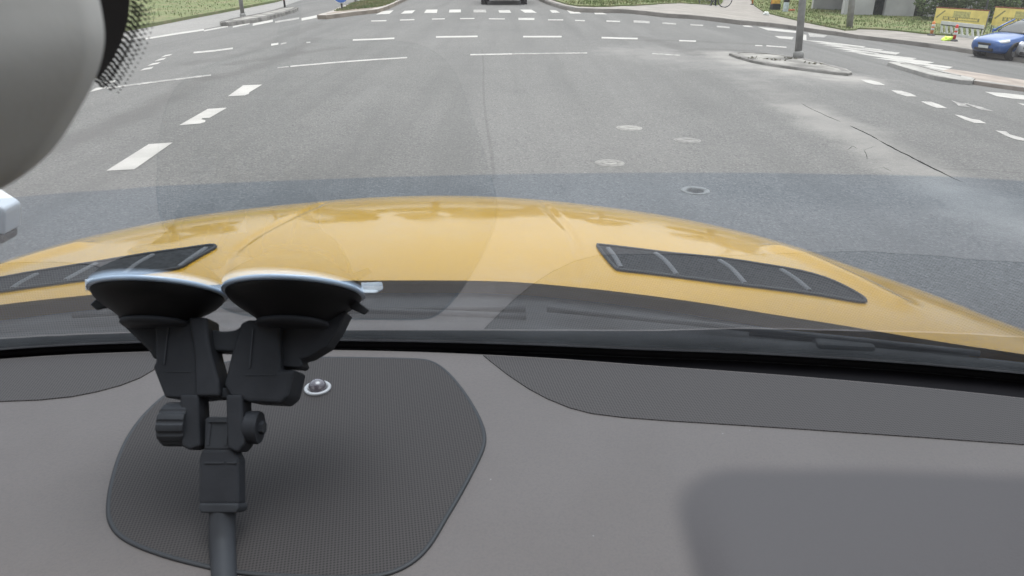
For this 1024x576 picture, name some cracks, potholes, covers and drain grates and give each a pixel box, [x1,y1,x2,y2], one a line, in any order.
utility cover [594,159,625,167]
utility cover [681,186,710,195]
crack [803,104,962,182]
